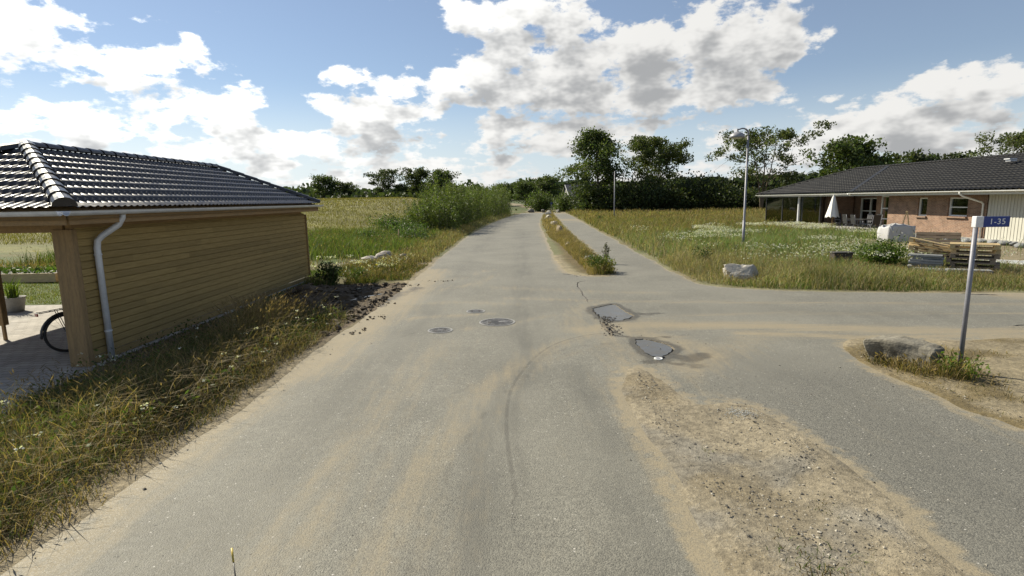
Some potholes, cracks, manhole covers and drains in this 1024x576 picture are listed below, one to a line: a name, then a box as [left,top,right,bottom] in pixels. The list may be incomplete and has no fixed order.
pothole [592,304,634,322]
manhole cover [479,318,515,326]
pothole [635,339,675,357]
